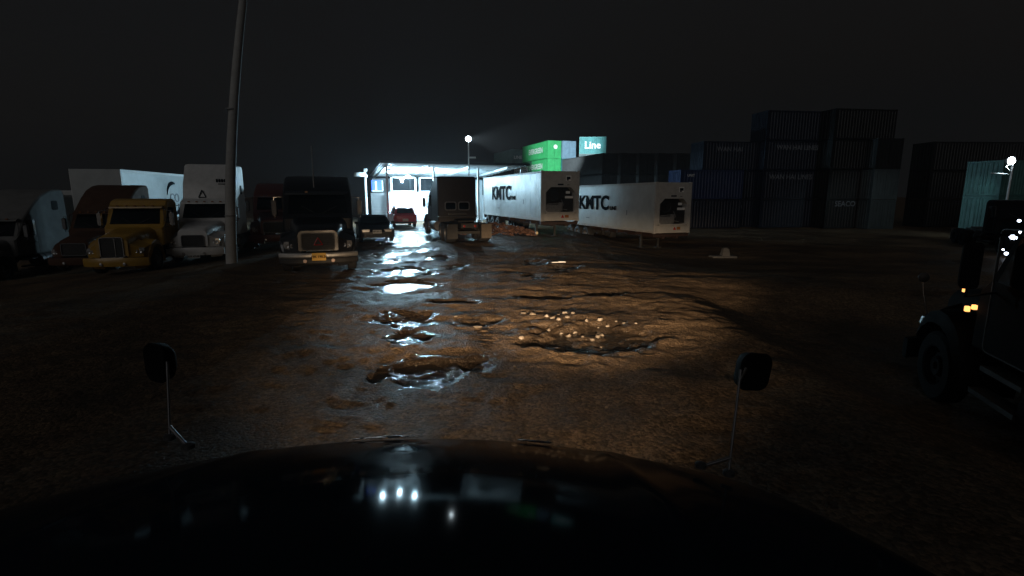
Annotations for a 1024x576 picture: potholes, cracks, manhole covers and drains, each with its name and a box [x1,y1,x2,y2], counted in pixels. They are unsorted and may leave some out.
pothole [425,353,497,380]
pothole [369,250,411,259]
pothole [381,328,442,346]
pothole [365,365,388,384]
pothole [377,353,464,391]
pothole [368,265,443,279]
pothole [449,312,514,329]
pothole [445,263,470,271]
pothole [502,318,676,359]
pothole [368,308,439,330]
pothole [370,278,448,294]
